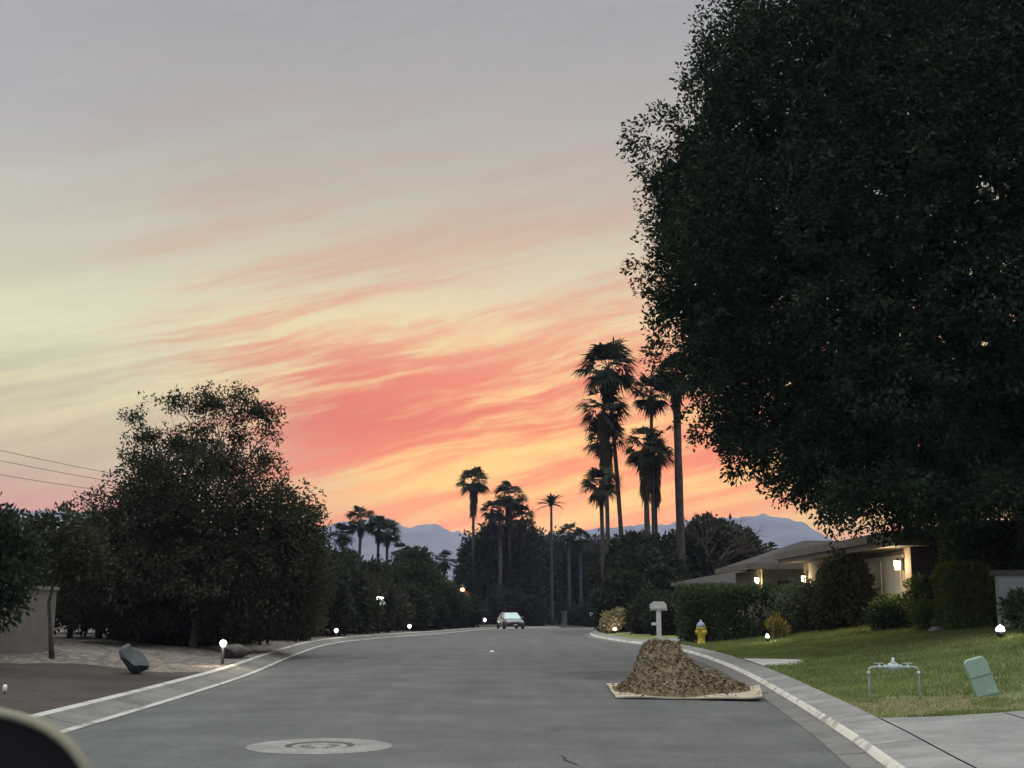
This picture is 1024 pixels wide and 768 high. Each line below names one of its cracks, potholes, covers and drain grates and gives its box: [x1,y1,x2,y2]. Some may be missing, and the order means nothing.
manhole cover [245,738,393,755]
